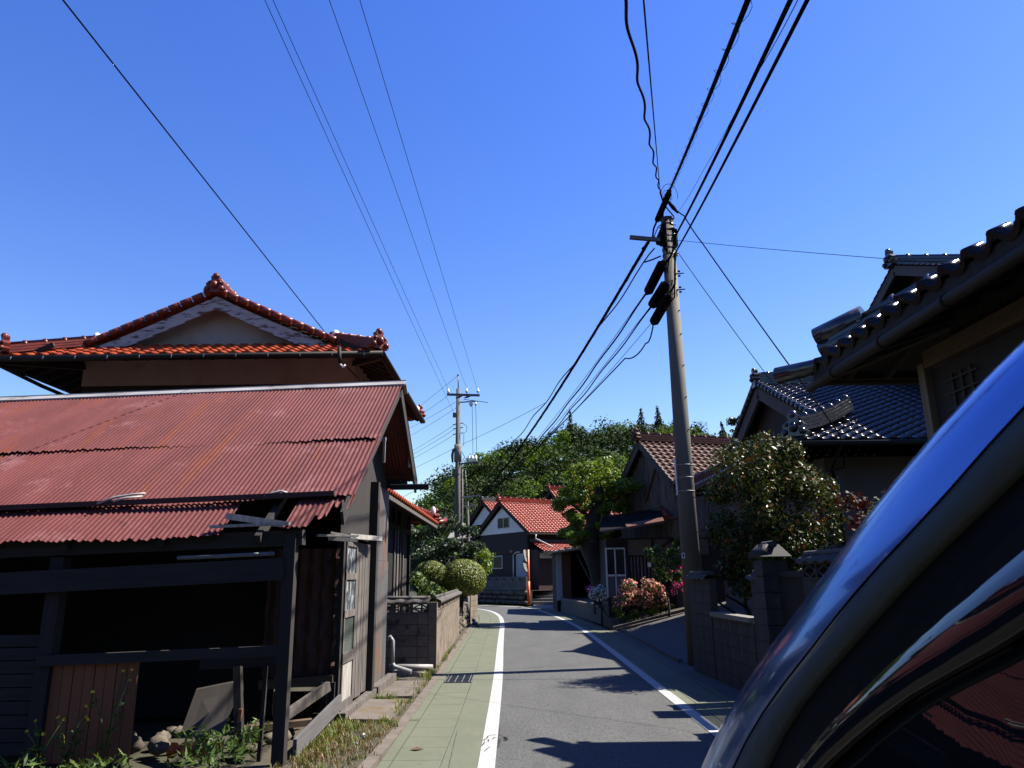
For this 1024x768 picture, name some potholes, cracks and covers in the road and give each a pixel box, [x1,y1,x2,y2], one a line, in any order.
drain grate [444,675,474,683]
